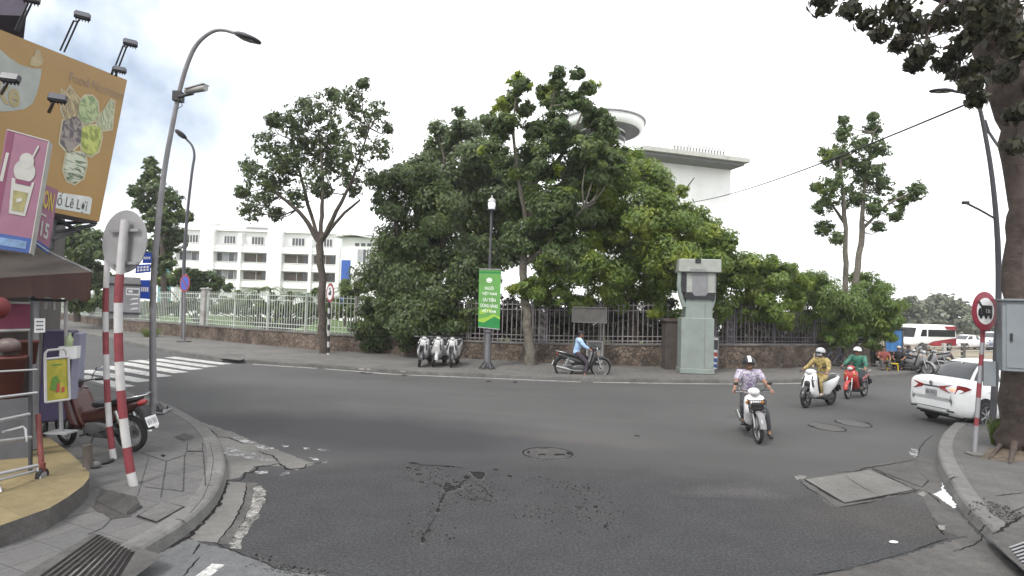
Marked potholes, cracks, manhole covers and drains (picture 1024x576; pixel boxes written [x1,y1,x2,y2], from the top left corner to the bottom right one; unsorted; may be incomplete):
crack [216,436,322,481]
manhole cover [808,423,847,432]
manhole cover [520,447,575,461]
drain grate [1009,541,1024,566]
